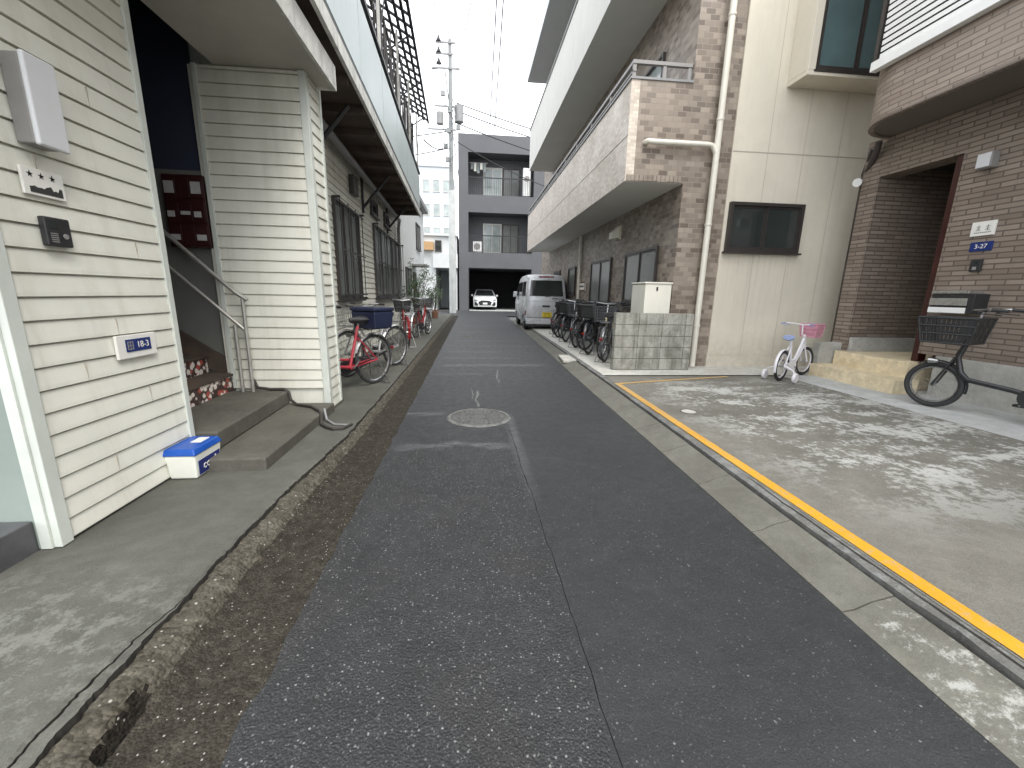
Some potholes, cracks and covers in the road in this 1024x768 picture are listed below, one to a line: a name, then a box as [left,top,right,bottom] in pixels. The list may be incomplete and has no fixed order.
crack [470,368,500,407]
manhole cover [447,408,511,428]
